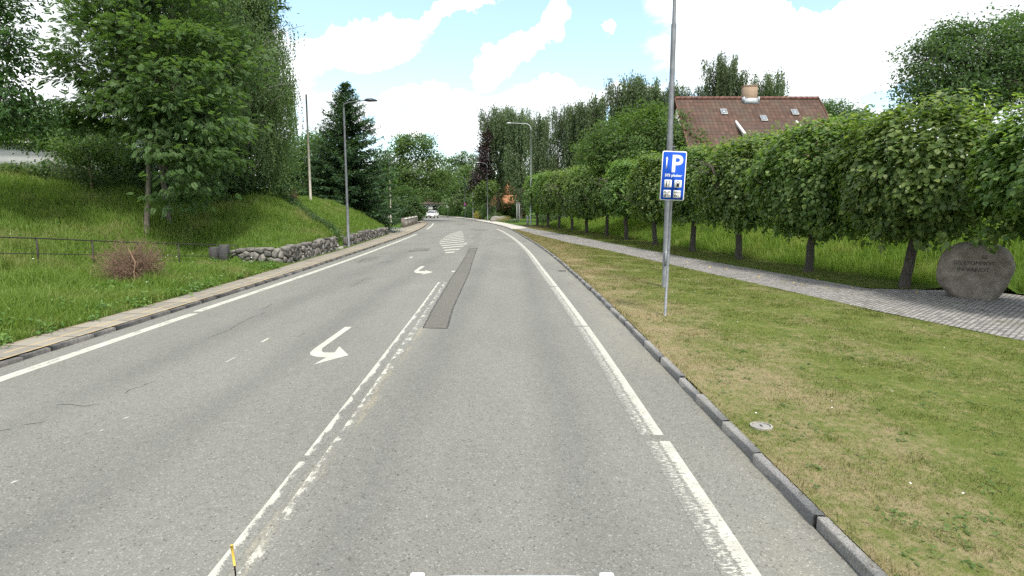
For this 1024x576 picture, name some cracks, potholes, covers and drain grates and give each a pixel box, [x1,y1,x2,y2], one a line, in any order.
manhole cover [750,421,773,431]
